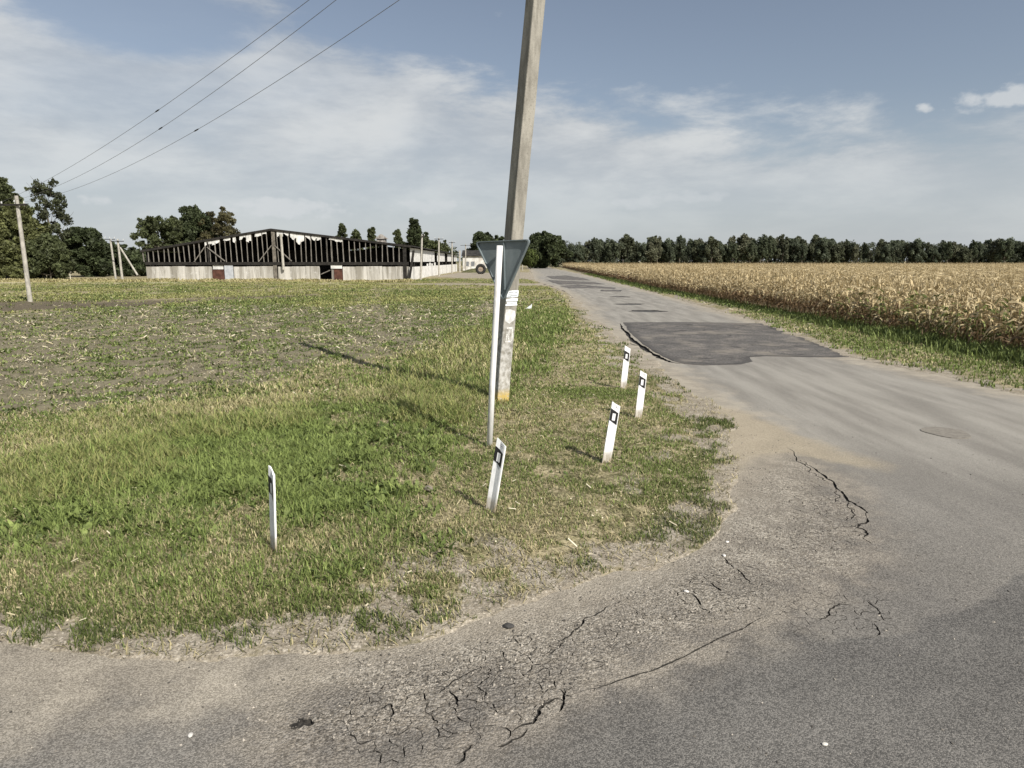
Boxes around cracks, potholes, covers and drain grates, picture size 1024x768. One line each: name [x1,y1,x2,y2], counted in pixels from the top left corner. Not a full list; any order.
crack [677,559,773,619]
crack [789,449,872,554]
crack [777,588,894,639]
crack [325,596,679,765]
